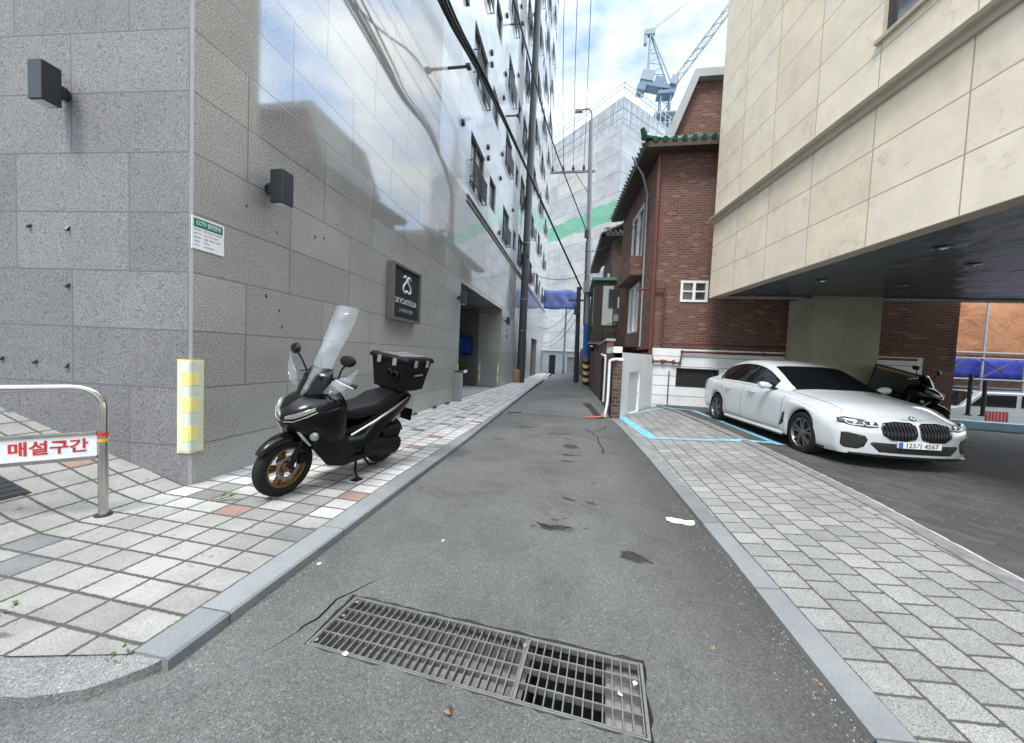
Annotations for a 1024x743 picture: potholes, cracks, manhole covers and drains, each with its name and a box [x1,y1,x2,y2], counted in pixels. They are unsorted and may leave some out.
drain grate [304,594,654,743]
crack [268,579,378,650]
crack [521,413,614,455]
